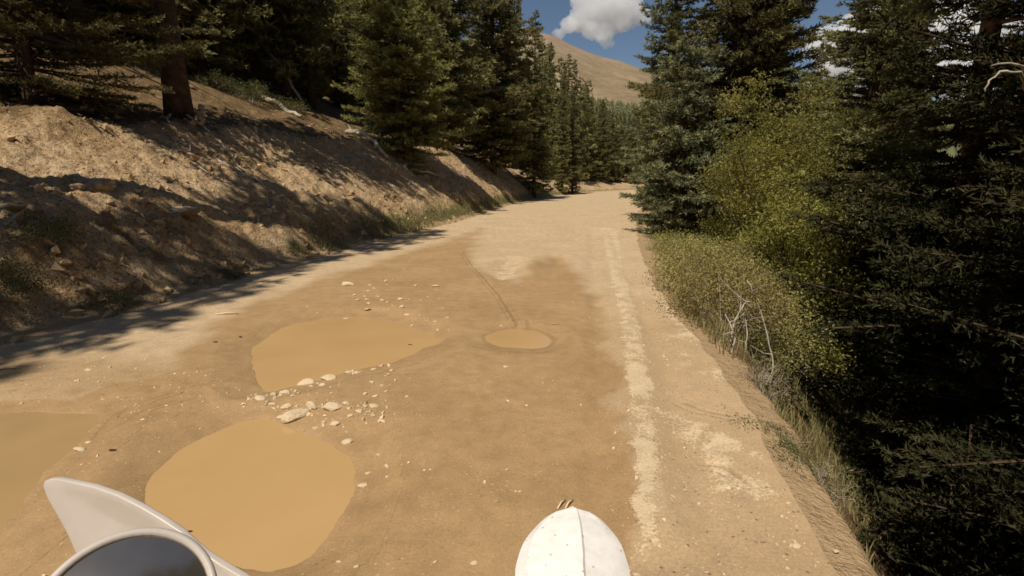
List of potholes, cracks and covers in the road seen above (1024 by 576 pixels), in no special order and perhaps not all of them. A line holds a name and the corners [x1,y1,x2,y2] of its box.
pothole [460,321,573,353]
pothole [92,396,405,576]
pothole [0,391,153,576]
pothole [212,307,465,401]
